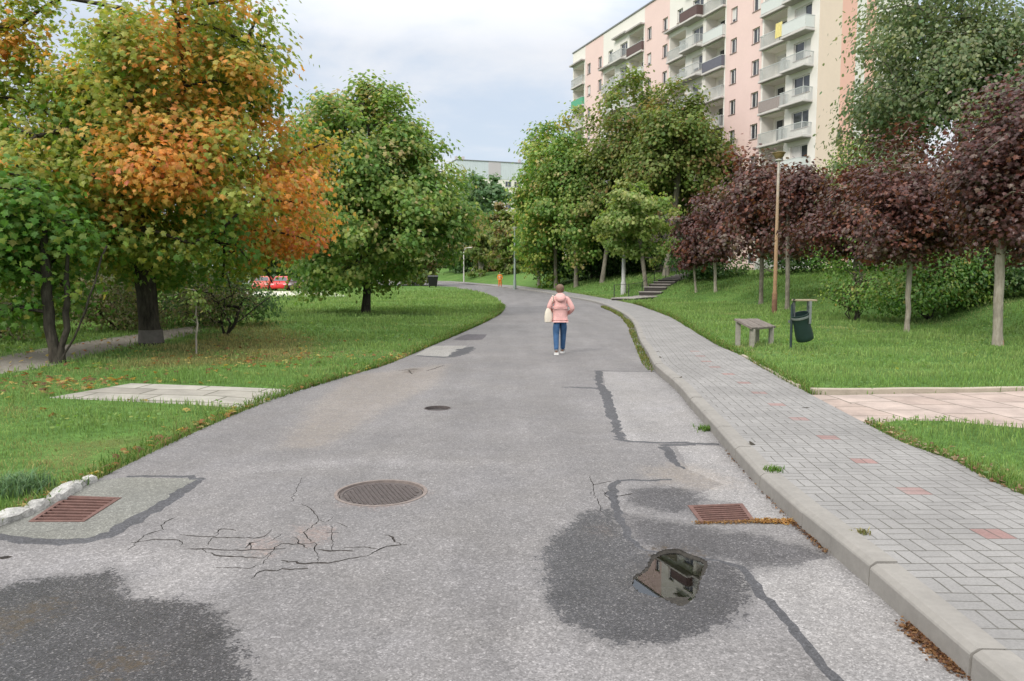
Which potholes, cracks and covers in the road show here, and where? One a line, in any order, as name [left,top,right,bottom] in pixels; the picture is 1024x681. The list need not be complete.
manhole cover [334,479,428,507]
crack [589,476,633,512]
drain grate [28,495,122,522]
pothole [632,549,708,606]
drain grate [688,503,754,524]
